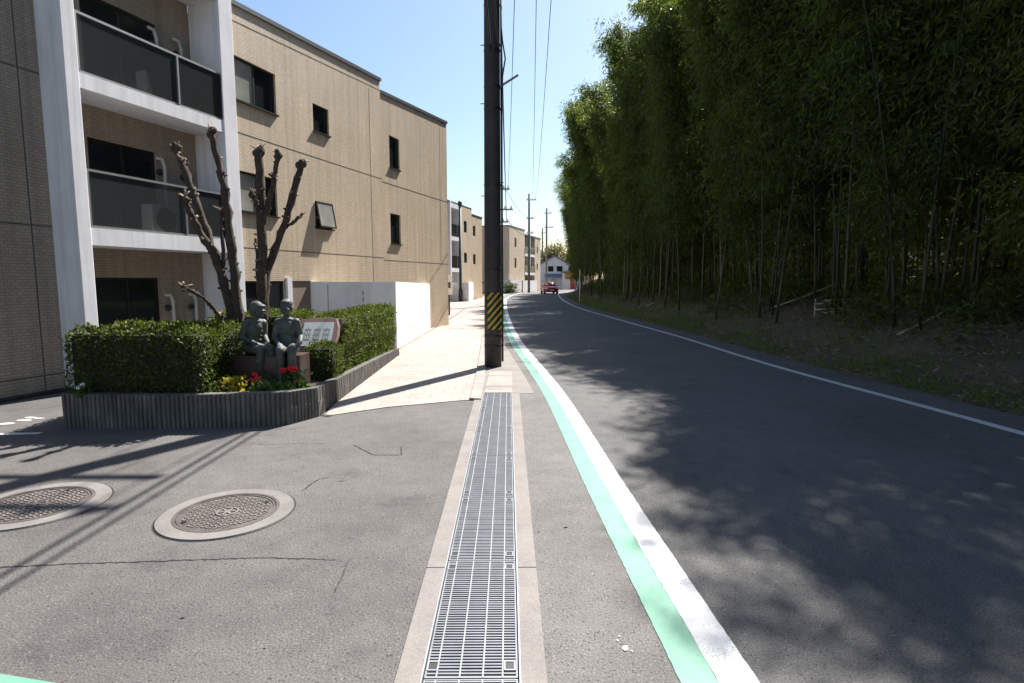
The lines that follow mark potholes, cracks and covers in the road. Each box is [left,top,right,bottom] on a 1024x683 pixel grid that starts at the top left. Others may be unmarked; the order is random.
drain grate [463,456,514,496]
crack [0,557,349,592]
drain grate [477,408,512,428]
drain grate [424,561,518,679]
drain grate [449,496,515,561]
manhole cover [152,489,296,542]
drain grate [471,428,513,456]
manhole cover [0,482,114,532]
drain grate [481,393,511,408]
